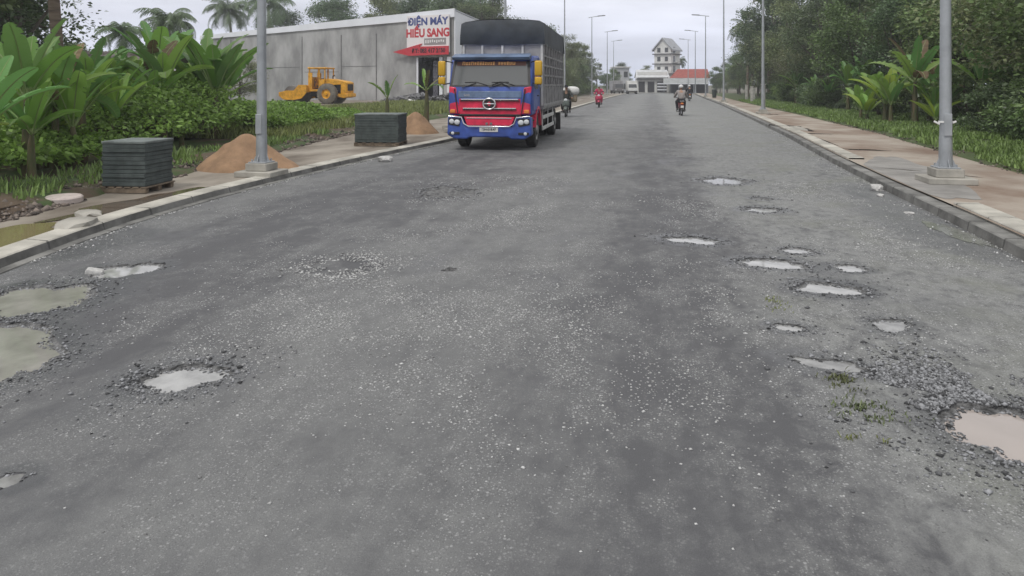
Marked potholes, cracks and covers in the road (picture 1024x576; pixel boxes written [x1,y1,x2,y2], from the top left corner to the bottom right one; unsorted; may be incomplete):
pothole [0,468,37,490]
pothole [709,251,828,279]
pothole [765,244,848,257]
pothole [850,313,924,335]
pothole [692,339,1024,507]
pothole [737,205,793,216]
pothole [634,231,755,253]
pothole [681,174,780,187]
pothole [262,243,445,292]
pothole [0,307,127,423]
pothole [757,314,844,340]
pothole [54,336,297,444]
